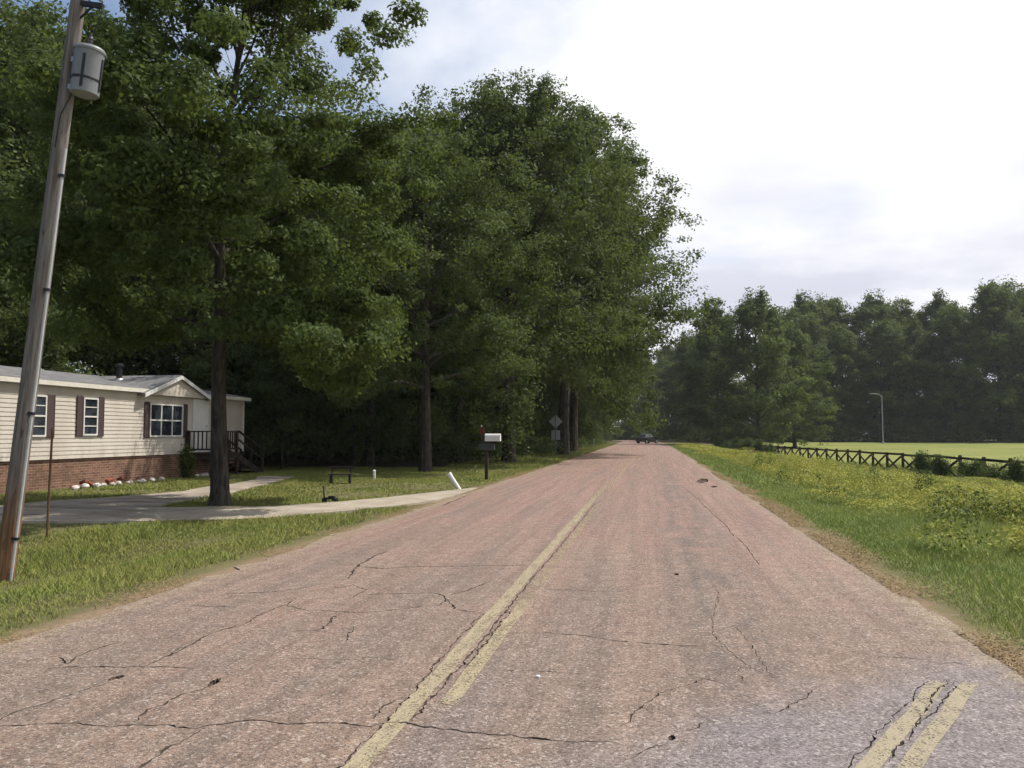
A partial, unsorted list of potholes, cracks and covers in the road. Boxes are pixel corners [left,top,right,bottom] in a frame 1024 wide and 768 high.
crack [0,503,616,768]
crack [776,656,972,768]
crack [545,592,772,724]
